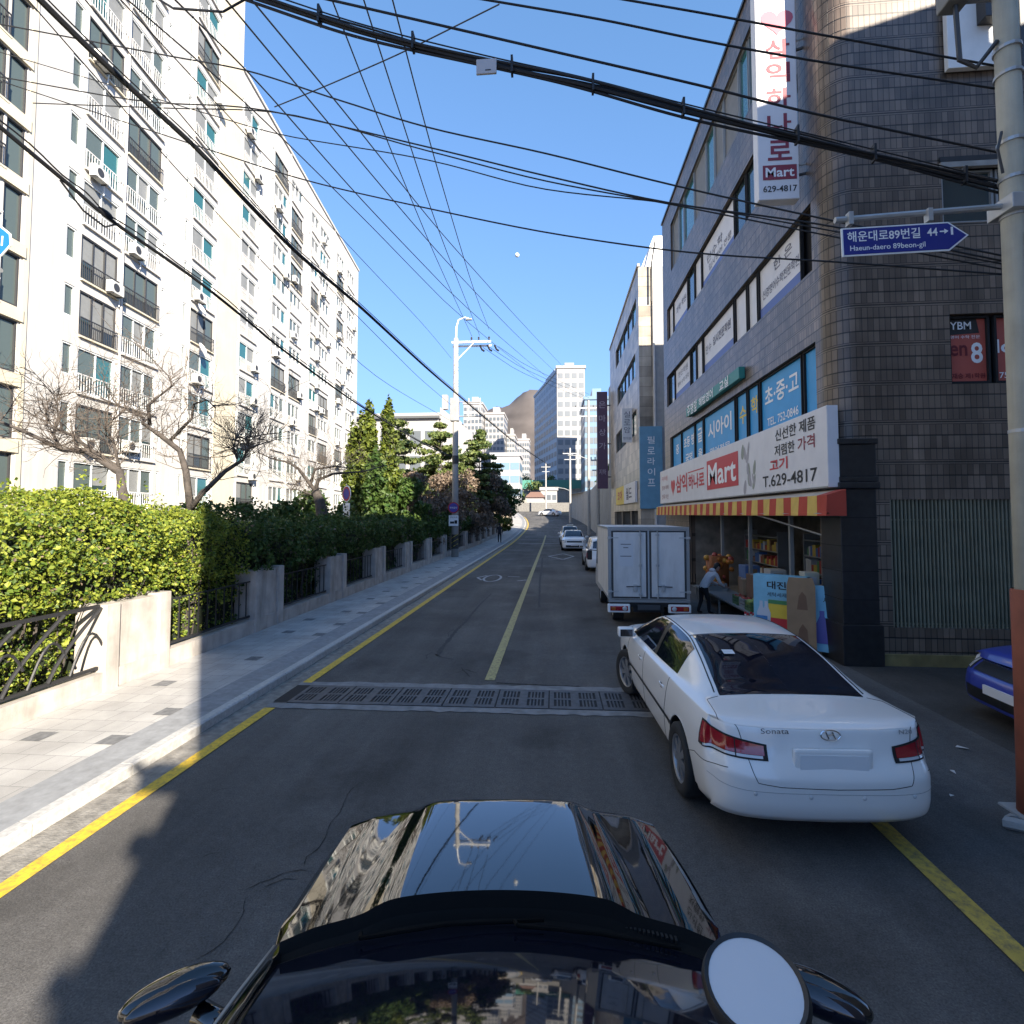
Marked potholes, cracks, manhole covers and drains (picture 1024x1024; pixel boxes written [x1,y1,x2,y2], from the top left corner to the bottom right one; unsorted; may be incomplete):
crack [198,784,358,958]
